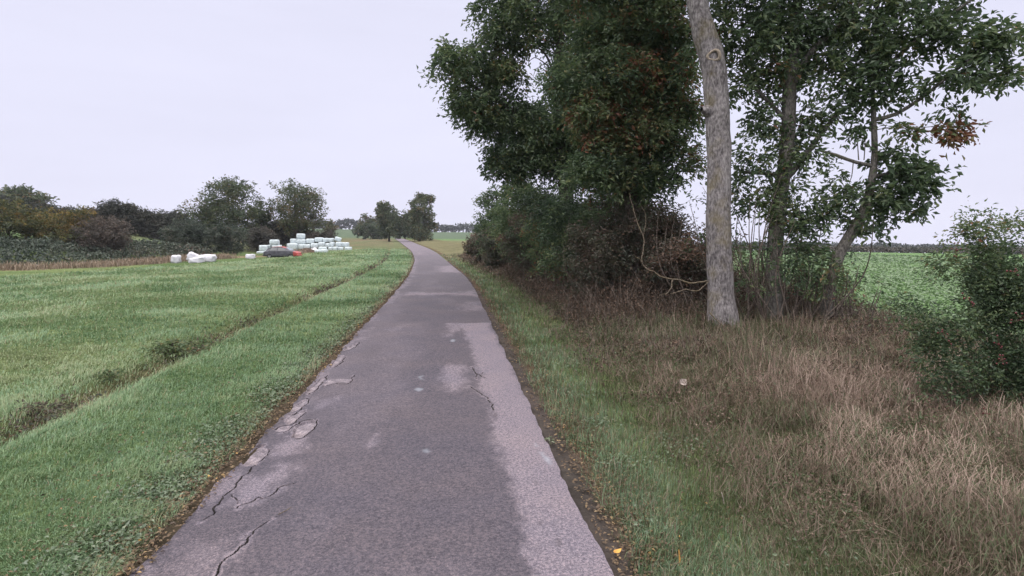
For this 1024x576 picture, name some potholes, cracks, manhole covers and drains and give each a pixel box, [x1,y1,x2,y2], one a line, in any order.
pothole [291,420,316,438]
crack [215,522,266,576]
crack [204,450,295,520]
pothole [285,410,305,425]
pothole [241,443,268,466]
crack [470,367,494,410]
